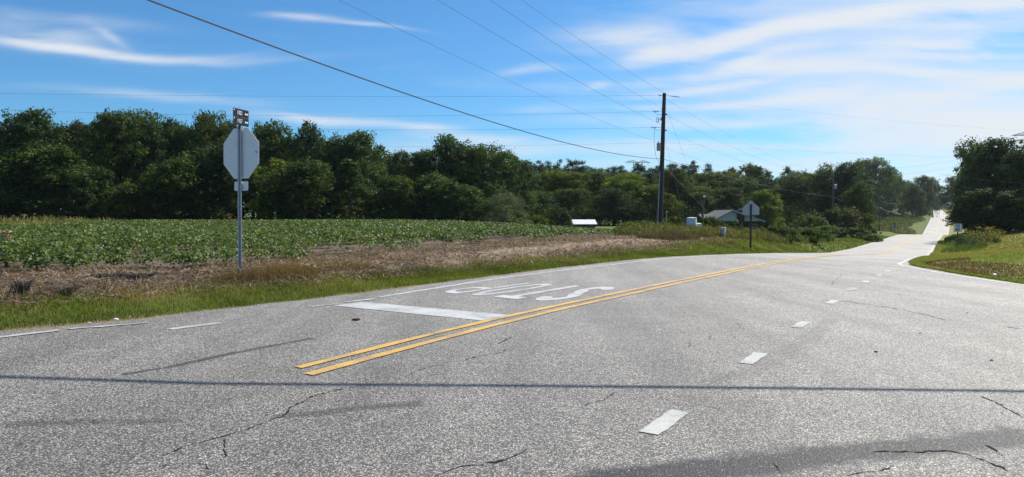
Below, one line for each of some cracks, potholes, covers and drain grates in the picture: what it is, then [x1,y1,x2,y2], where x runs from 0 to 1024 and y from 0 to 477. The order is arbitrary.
crack [159,385,360,471]
crack [435,448,528,476]
crack [849,444,1016,475]
